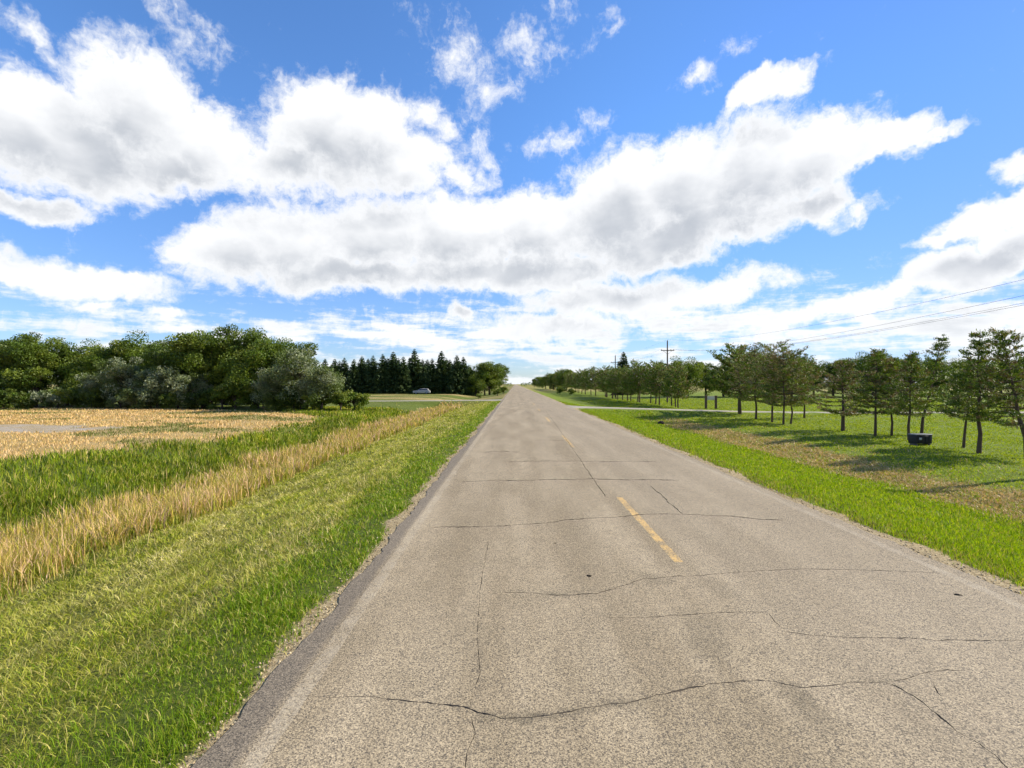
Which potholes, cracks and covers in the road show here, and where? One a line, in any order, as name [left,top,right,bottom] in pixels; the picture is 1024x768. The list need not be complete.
crack [435,479,776,528]
crack [308,545,1008,768]
